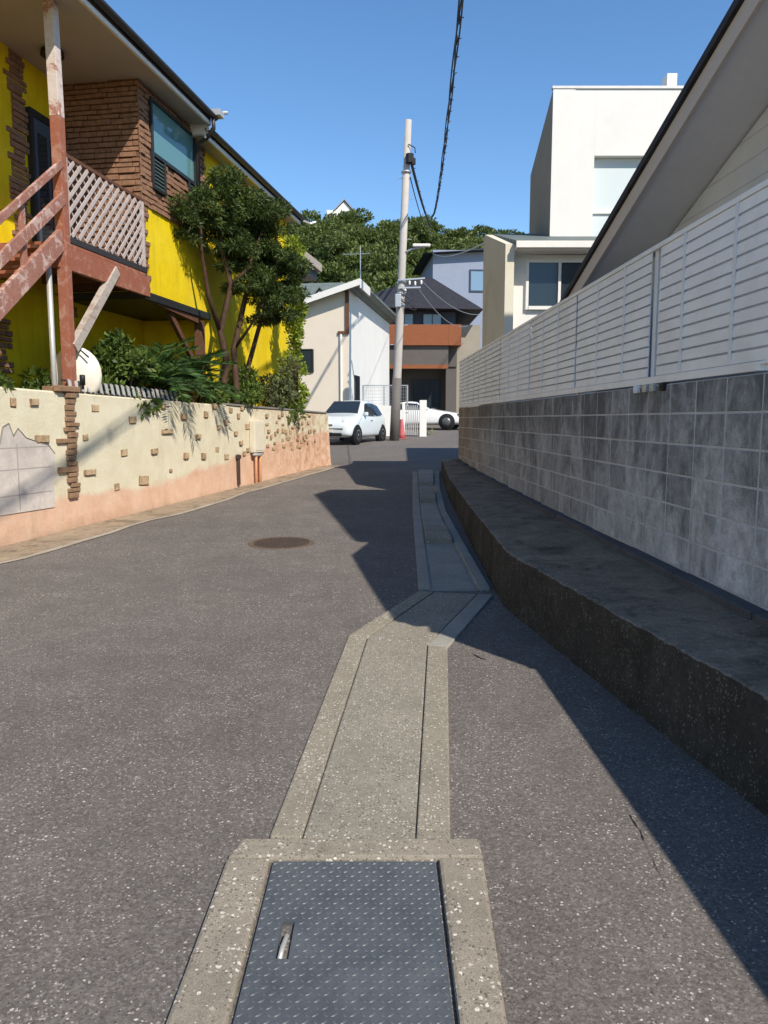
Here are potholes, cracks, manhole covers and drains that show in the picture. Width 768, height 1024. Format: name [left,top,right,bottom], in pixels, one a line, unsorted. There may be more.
manhole cover [233,861,454,1024]
crack [624,801,668,892]
manhole cover [248,537,314,550]
